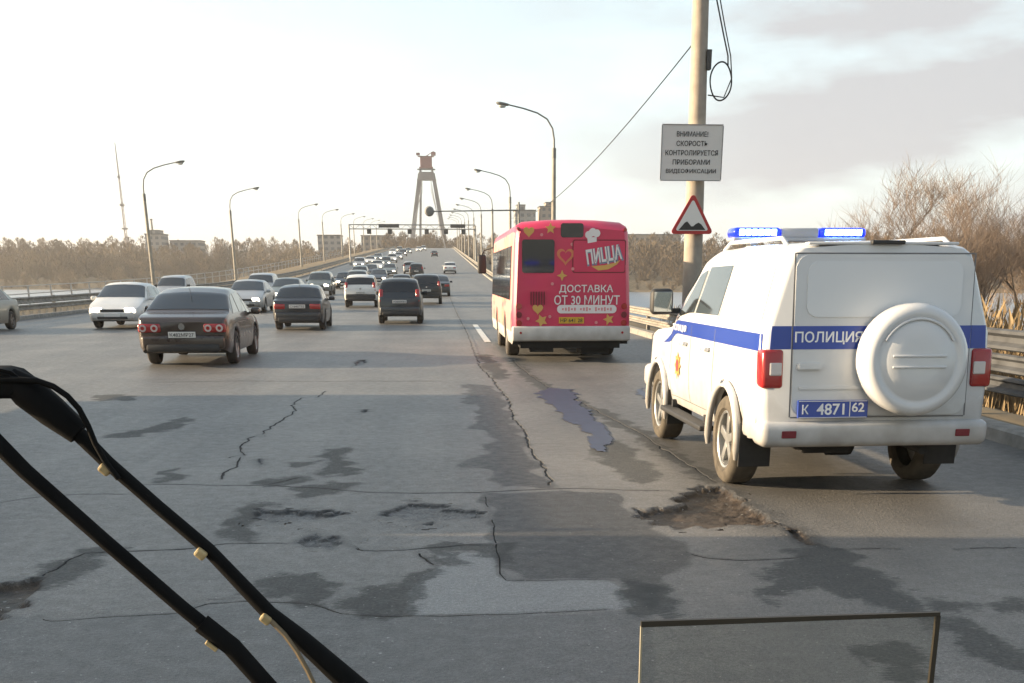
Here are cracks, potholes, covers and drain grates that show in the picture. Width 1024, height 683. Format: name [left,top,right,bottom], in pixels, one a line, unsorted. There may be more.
crack [0,359,722,625]
pothole [358,499,507,530]
pothole [614,483,797,533]
